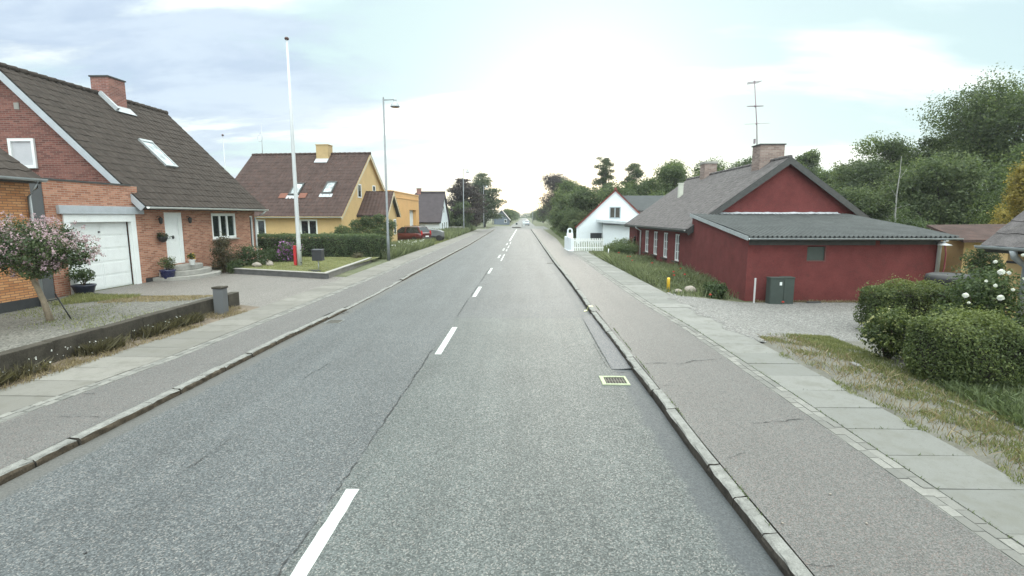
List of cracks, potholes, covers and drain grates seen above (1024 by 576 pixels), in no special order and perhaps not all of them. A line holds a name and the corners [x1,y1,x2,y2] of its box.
drain grate [599,376,630,385]
crack [277,350,432,576]
